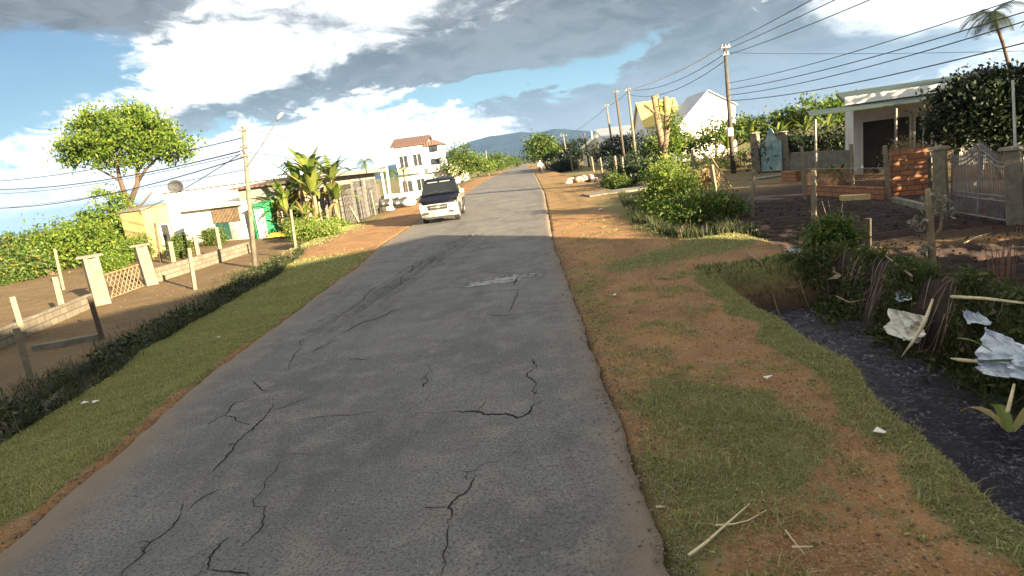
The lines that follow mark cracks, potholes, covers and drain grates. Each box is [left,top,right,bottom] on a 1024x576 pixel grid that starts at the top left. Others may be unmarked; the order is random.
crack [419,359,539,418]
crack [193,453,311,576]
crack [426,461,497,574]
crack [208,245,519,475]
crack [120,490,218,576]
